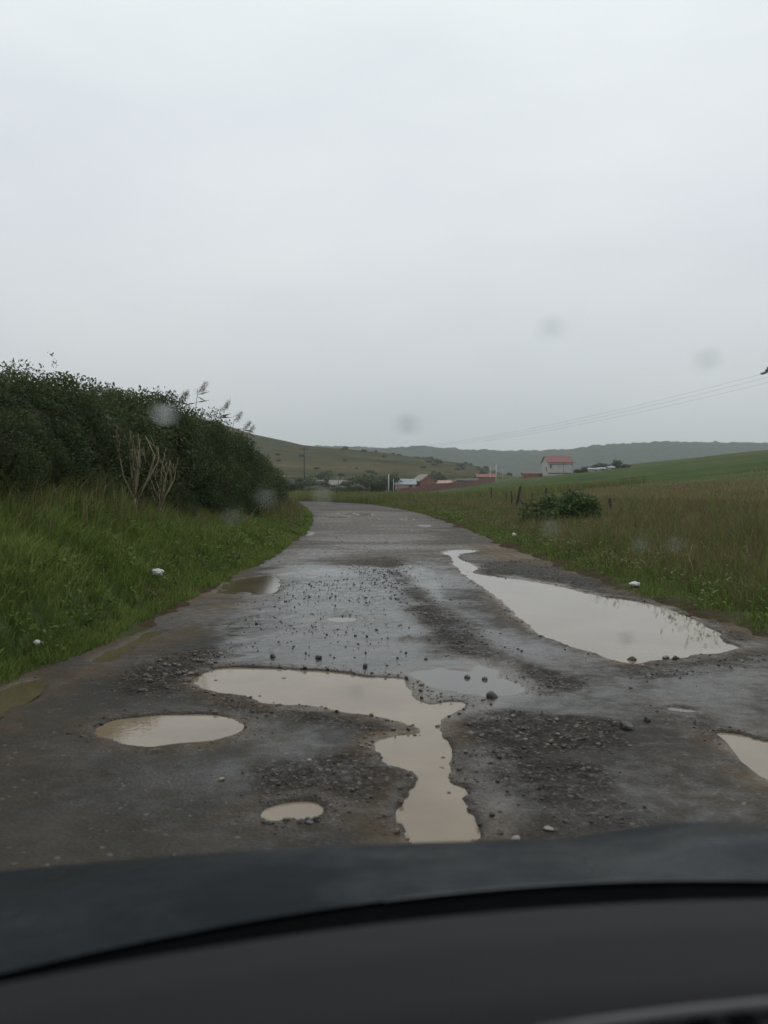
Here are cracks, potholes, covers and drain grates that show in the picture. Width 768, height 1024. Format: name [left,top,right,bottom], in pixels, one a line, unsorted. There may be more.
pothole [440,549,746,664]
pothole [321,614,364,622]
pothole [186,665,492,843]
pothole [86,711,250,747]
pothole [708,728,768,781]
